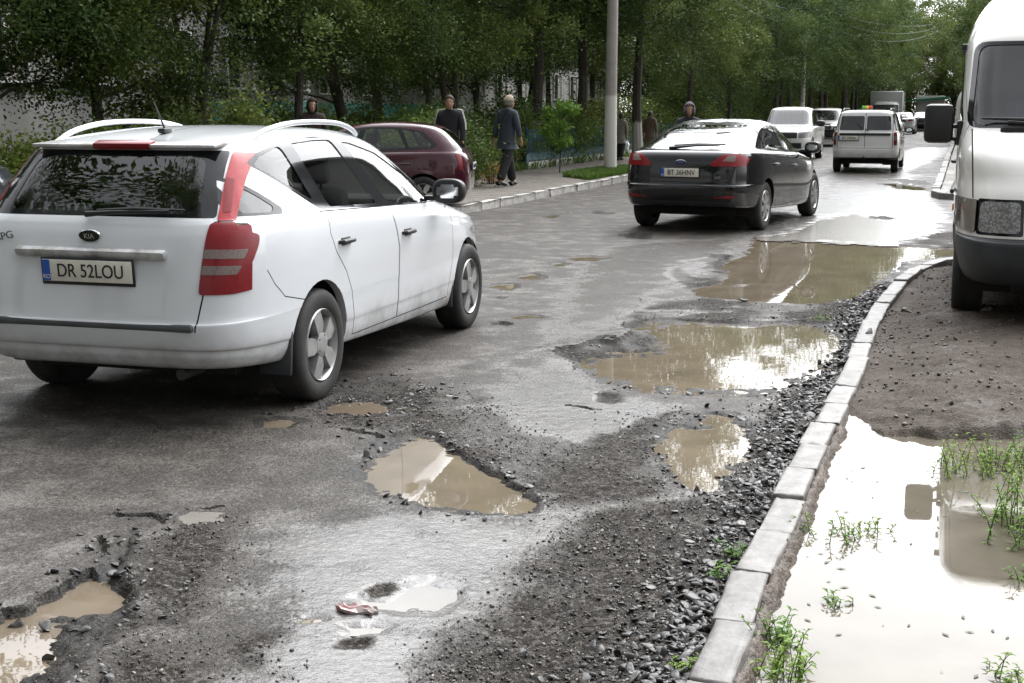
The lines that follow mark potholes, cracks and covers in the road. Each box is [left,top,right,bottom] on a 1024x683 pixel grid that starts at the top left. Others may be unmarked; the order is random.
pothole [683,234,954,306]
pothole [483,282,521,291]
pothole [352,427,544,517]
pothole [551,317,859,398]
pothole [358,581,401,602]
pothole [249,416,310,428]
pothole [639,411,771,492]
pothole [0,530,143,683]
pothole [310,380,442,421]
